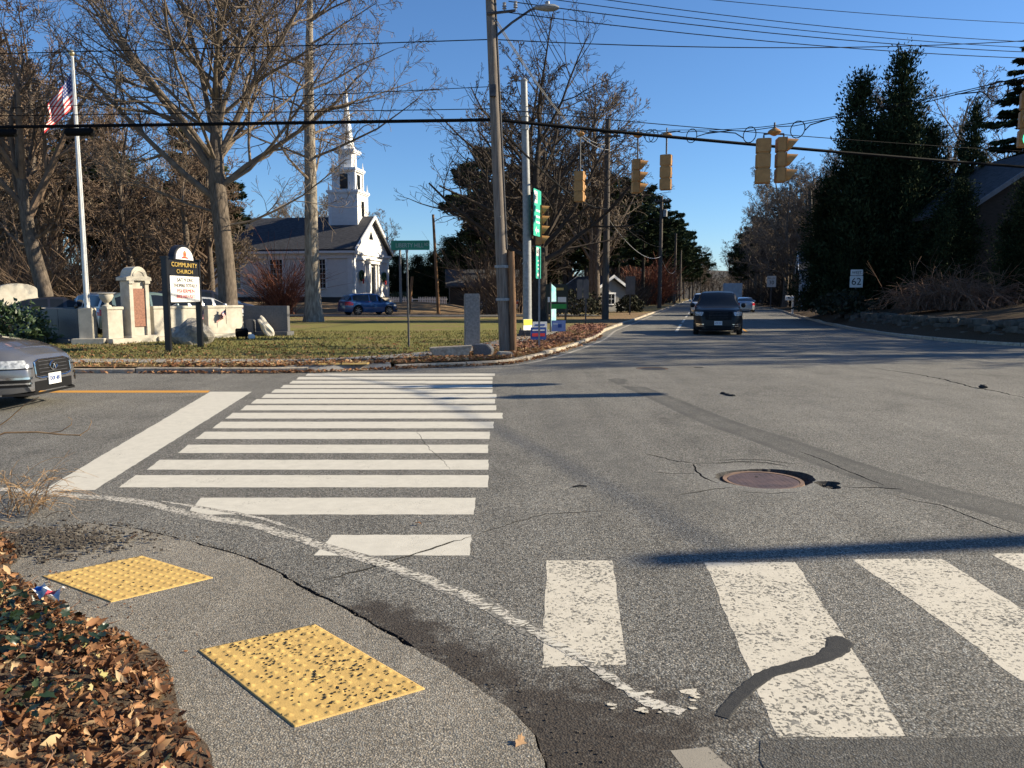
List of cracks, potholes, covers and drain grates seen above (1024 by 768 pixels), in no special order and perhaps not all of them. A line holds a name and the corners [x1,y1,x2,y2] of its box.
pothole [814,481,841,489]
crack [311,509,616,584]
manhole cover [722,471,805,489]
crack [883,369,1024,398]
crack [648,451,1023,536]
